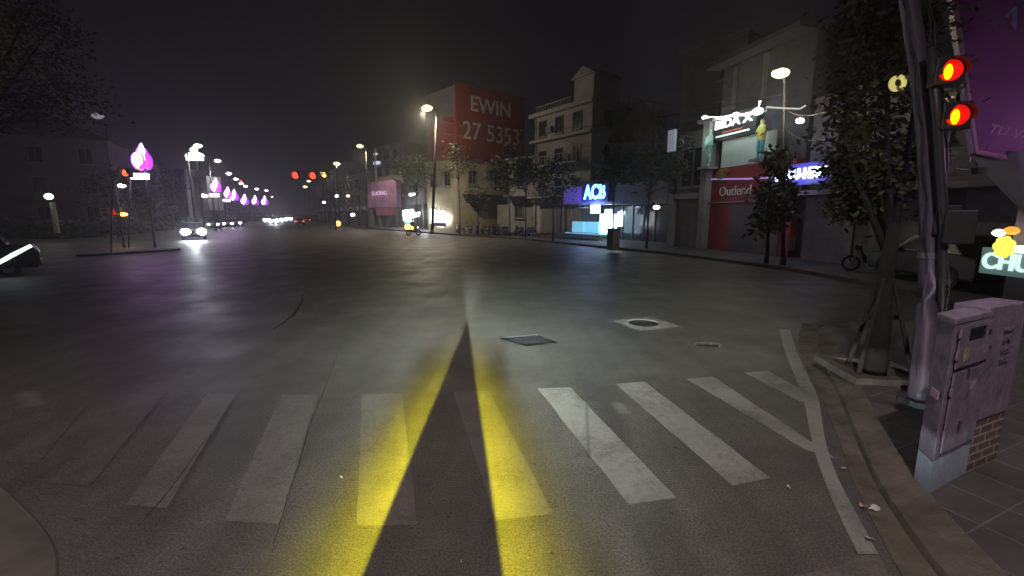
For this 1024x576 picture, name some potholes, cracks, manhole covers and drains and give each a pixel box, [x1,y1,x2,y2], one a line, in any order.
crack [138,429,213,527]
manhole cover [613,316,680,331]
crack [272,350,339,551]
crack [273,294,303,330]
manhole cover [499,334,558,346]
